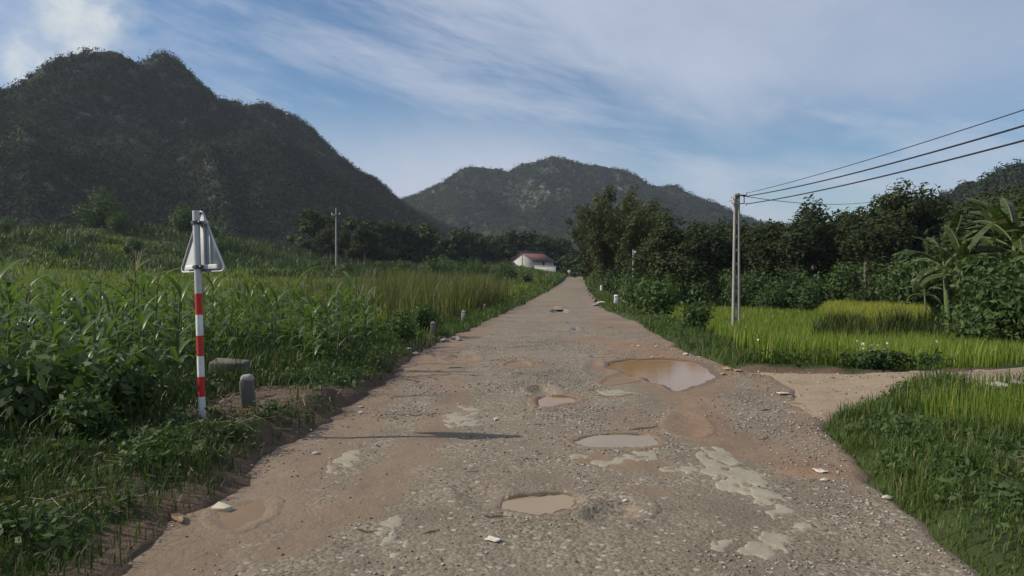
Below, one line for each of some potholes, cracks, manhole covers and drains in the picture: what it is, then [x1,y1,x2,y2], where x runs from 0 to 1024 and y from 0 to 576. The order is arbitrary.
pothole [489,487,590,520]
pothole [564,430,671,450]
pothole [593,375,643,386]
pothole [601,357,724,392]
pothole [528,394,584,408]
pothole [198,494,285,534]
pothole [660,410,717,439]
pothole [499,360,535,368]
